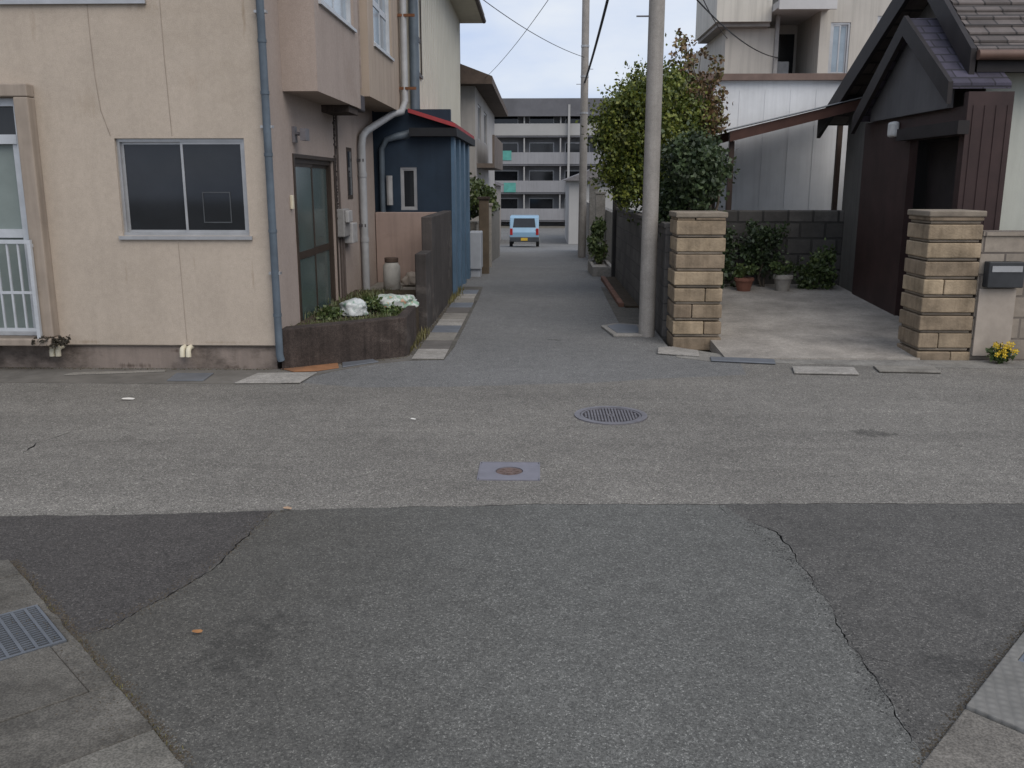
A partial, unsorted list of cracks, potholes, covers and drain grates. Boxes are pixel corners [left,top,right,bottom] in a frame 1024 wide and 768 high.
drain grate [0,604,67,661]
crack [753,522,917,746]
manhole cover [477,462,540,481]
crack [92,512,272,633]
